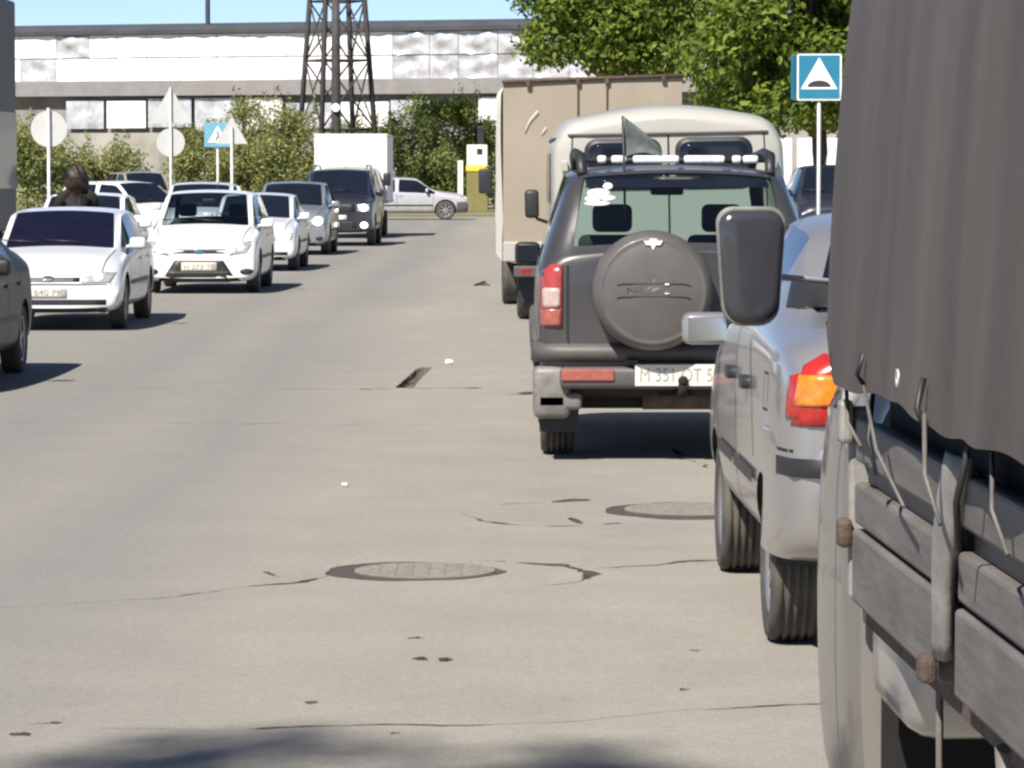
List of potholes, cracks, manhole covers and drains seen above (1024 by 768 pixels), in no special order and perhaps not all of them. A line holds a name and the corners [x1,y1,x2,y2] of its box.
crack [463,499,591,527]
manhole cover [605,502,715,520]
crack [5,572,327,608]
manhole cover [325,562,507,581]
crack [105,703,820,730]
pothole [395,367,432,388]
crack [478,560,717,586]
